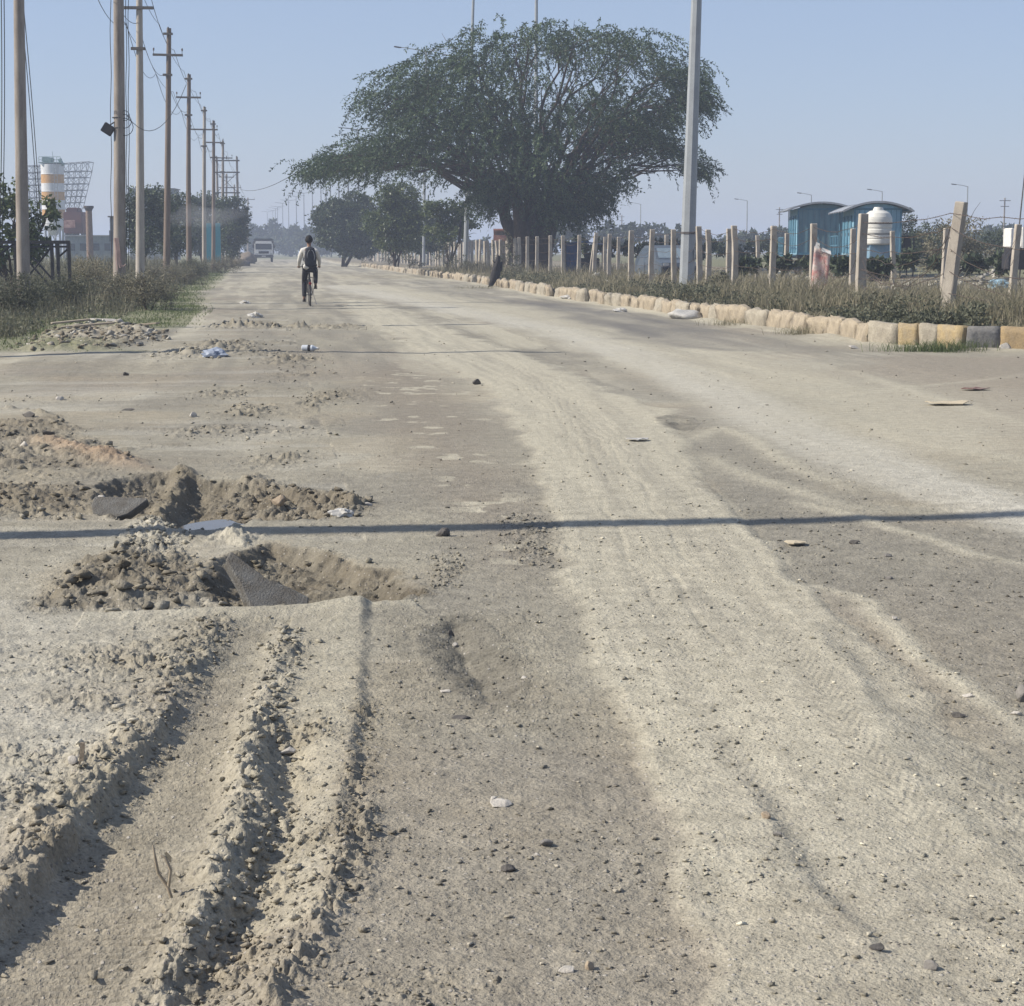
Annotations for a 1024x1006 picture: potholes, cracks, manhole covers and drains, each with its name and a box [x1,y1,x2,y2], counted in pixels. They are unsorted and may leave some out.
pothole [192,542,438,607]
pothole [86,464,369,529]
